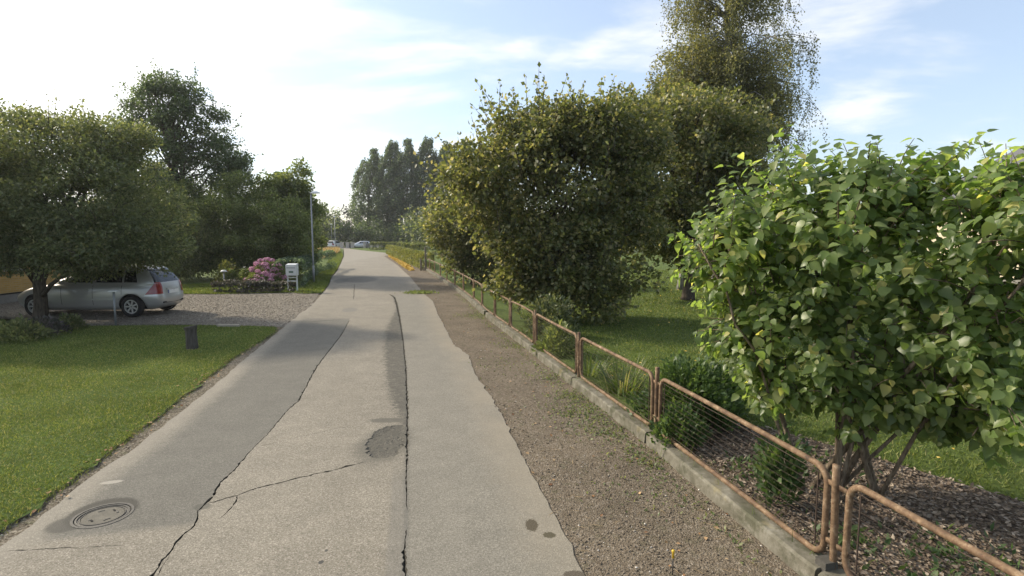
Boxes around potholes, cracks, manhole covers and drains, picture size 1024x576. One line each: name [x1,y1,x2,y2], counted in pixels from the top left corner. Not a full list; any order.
crack [389,294,410,576]
manhole cover [70,502,135,529]
crack [150,320,363,576]
